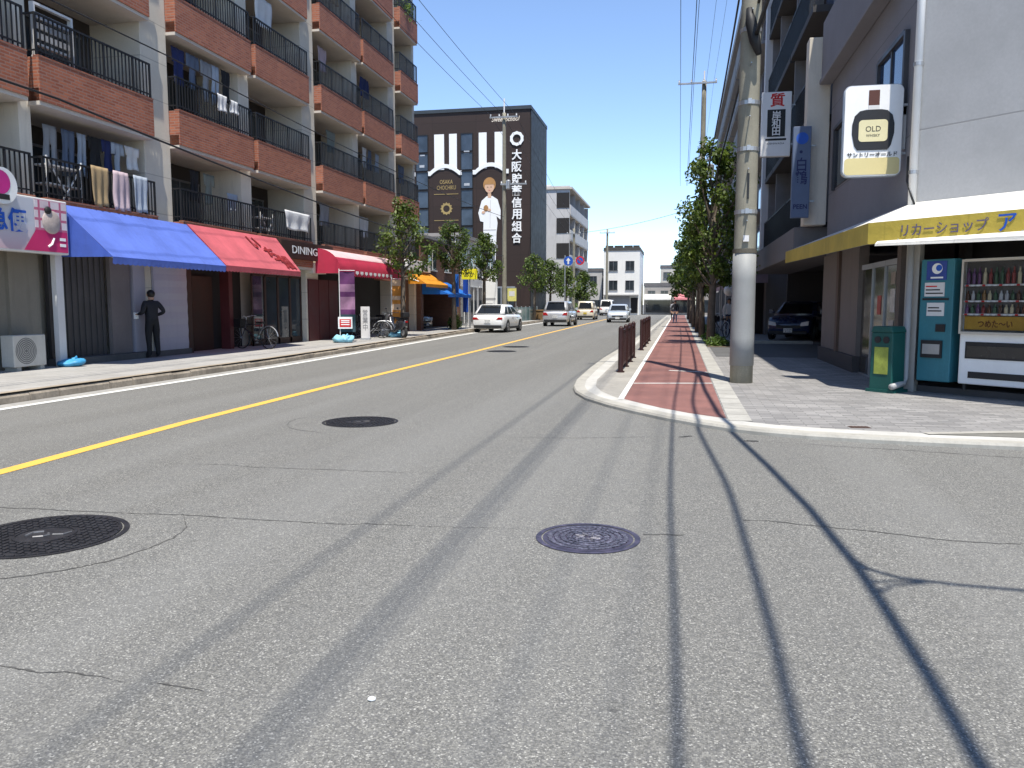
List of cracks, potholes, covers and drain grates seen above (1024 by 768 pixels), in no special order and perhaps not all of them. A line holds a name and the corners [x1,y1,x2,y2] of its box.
manhole cover [536,523,641,554]
crack [0,665,123,682]
crack [753,520,1024,544]
manhole cover [322,416,398,427]
manhole cover [0,514,130,559]
crack [0,507,510,579]
